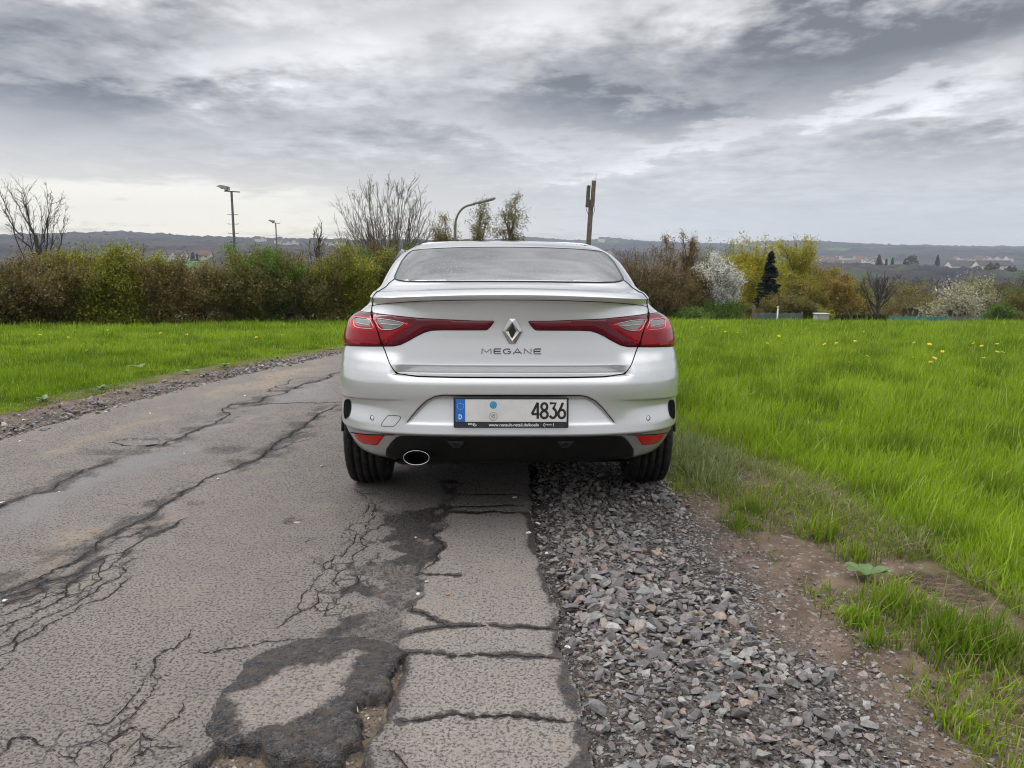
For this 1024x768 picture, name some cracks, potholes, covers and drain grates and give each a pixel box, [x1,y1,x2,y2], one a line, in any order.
crack [0,630,296,768]
pothole [206,653,409,768]
crack [0,372,340,670]
crack [280,491,386,626]
